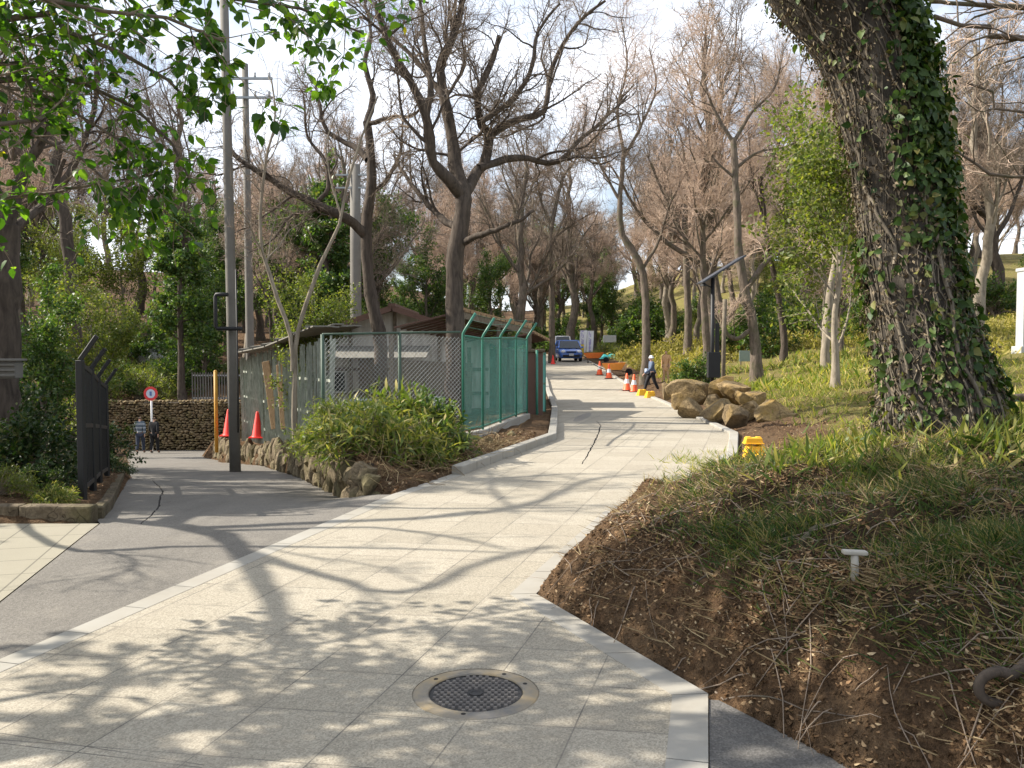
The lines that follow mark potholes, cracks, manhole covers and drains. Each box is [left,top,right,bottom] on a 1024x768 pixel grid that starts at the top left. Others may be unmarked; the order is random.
crack [141,482,171,524]
manhole cover [412,669,539,720]
